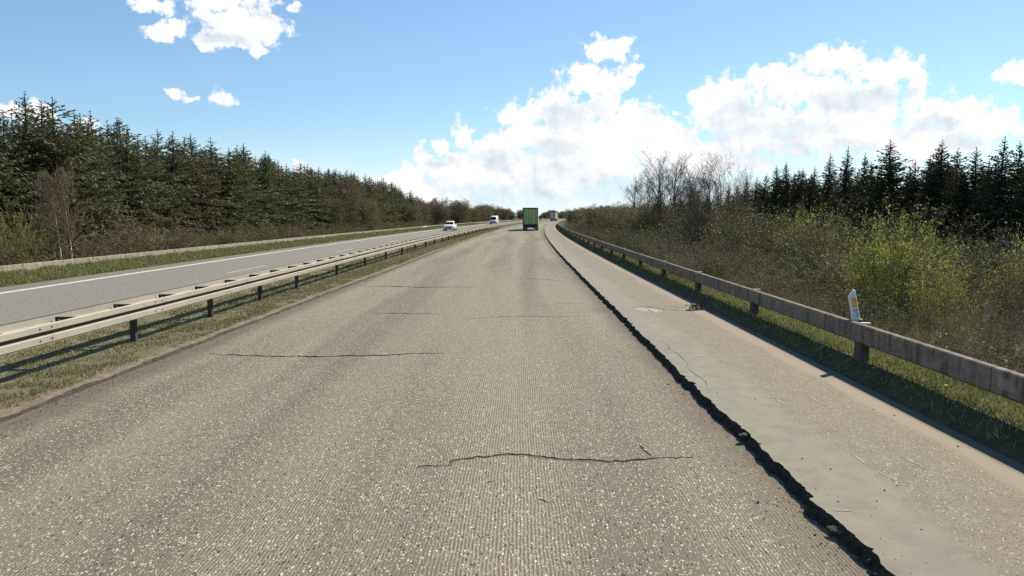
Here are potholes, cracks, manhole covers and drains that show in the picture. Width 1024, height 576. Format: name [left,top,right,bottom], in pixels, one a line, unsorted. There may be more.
crack [416,444,692,483]
